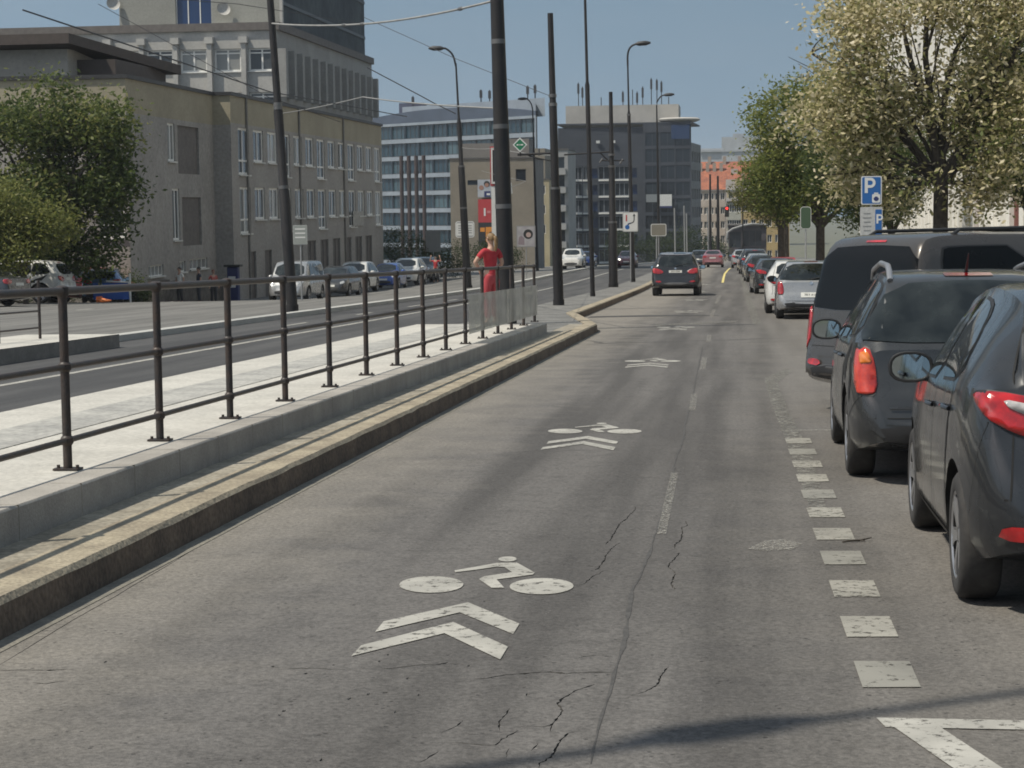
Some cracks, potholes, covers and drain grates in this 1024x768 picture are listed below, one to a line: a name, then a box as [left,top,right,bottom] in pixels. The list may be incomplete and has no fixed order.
crack [419,655,603,767]
crack [668,521,688,590]
crack [579,507,636,586]
